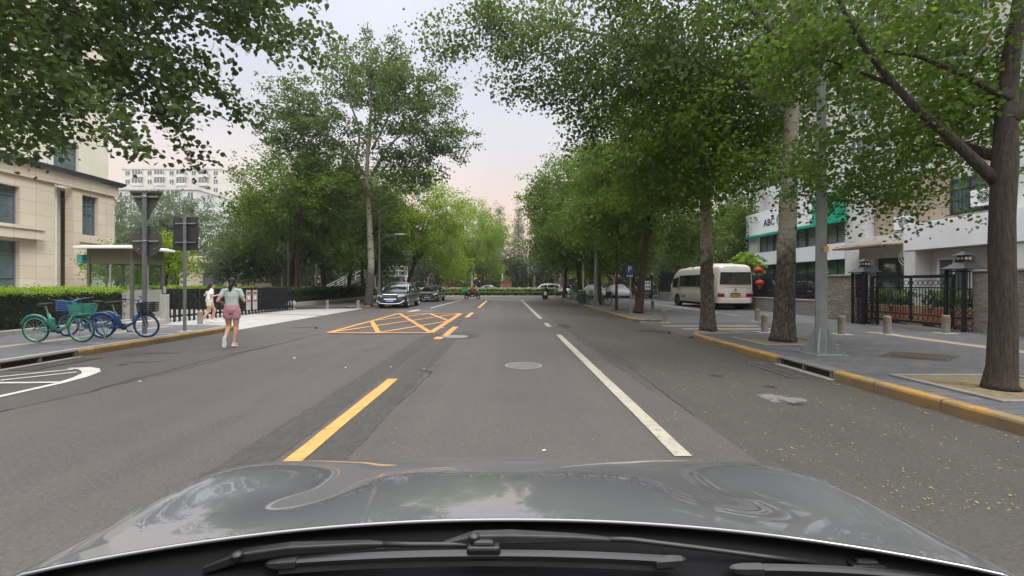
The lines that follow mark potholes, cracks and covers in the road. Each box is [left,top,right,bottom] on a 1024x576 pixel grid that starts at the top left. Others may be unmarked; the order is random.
drain grate [746,363,820,379]
drain grate [774,356,847,380]
